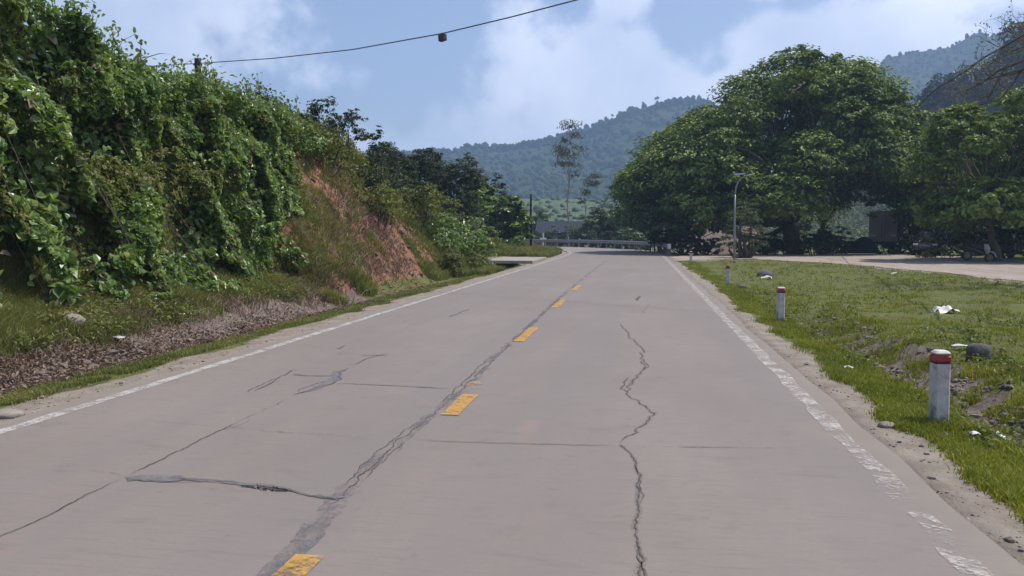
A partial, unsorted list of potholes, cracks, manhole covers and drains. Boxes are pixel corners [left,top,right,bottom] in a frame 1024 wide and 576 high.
crack [0,266,772,576]
